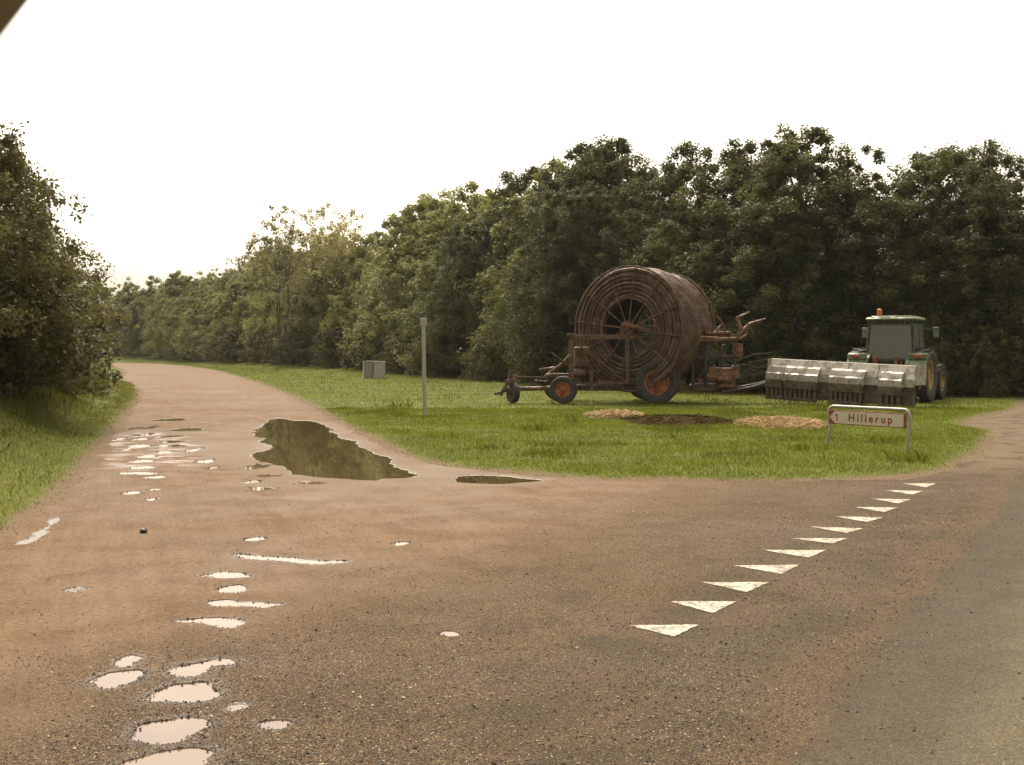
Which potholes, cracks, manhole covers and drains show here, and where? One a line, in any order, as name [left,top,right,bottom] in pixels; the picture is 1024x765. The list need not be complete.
pothole [14,518,62,545]
pothole [230,552,349,565]
pothole [224,700,251,711]
pothole [114,746,216,765]
pothole [199,570,252,579]
pothole [111,654,144,667]
pothole [214,583,249,593]
pothole [141,680,226,703]
pothole [127,714,216,745]
pothole [166,657,240,678]
pothole [256,718,294,730]
pothole [85,669,149,689]
